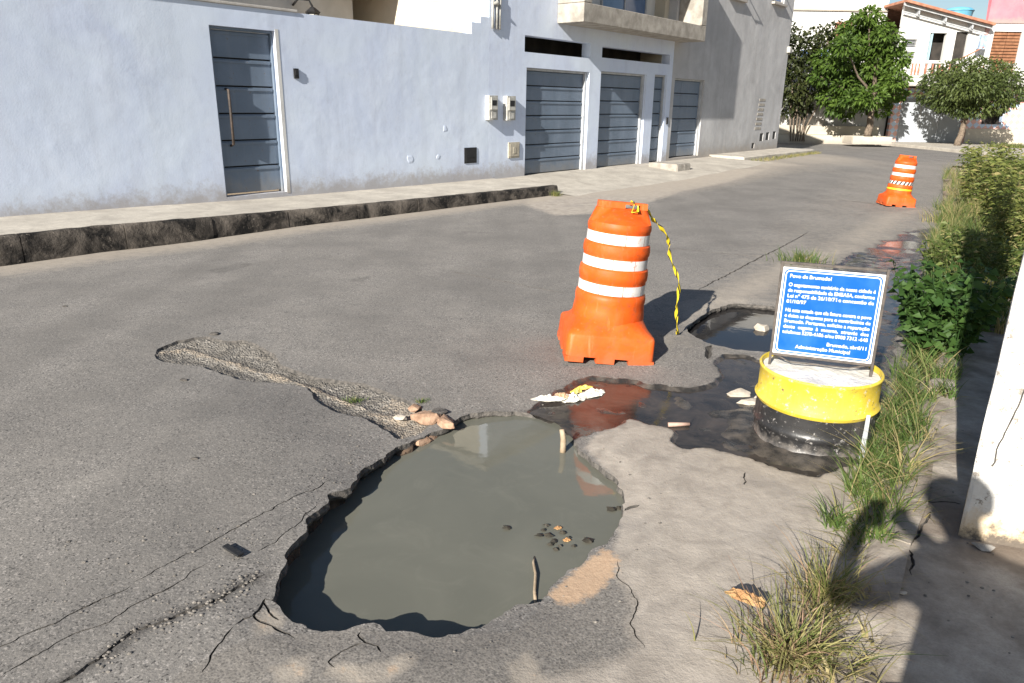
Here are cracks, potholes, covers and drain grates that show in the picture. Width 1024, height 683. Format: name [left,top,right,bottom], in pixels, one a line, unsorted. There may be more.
crack [909,501,960,575]
pothole [687,304,775,330]
crack [616,562,645,648]
pothole [263,411,630,668]
crack [0,480,329,683]
pothole [155,337,429,439]
